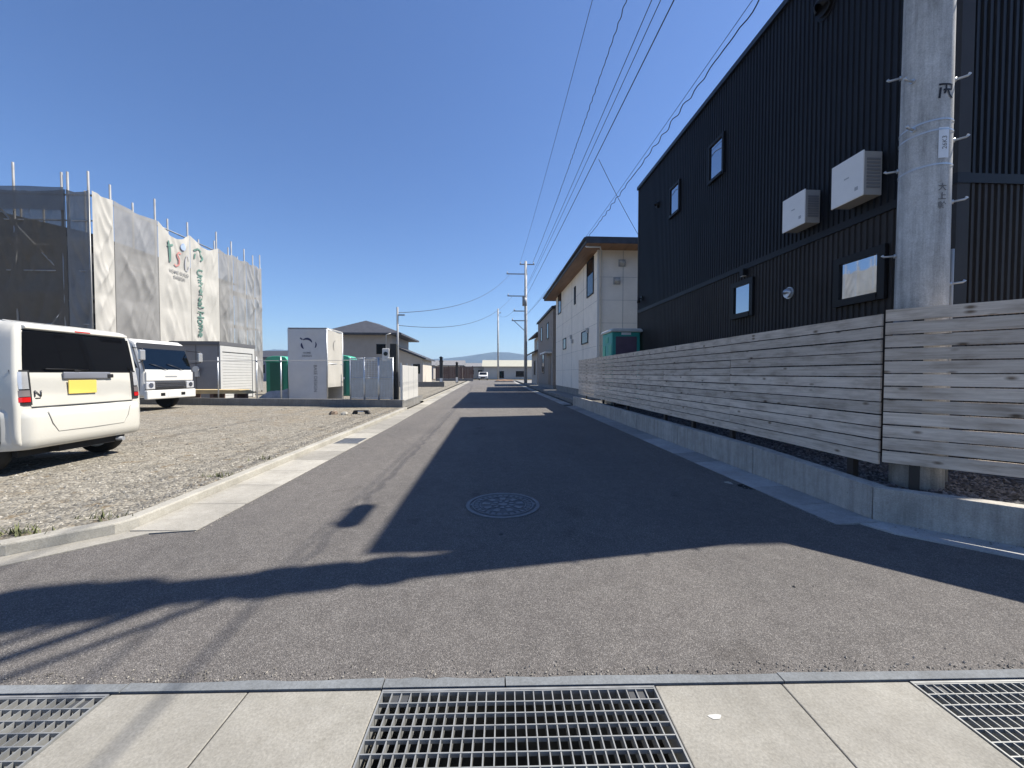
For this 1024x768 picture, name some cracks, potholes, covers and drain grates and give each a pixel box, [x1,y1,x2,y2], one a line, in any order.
drain grate [910,679,1024,768]
drain grate [352,685,693,768]
drain grate [0,694,109,768]
manhole cover [466,493,540,519]
